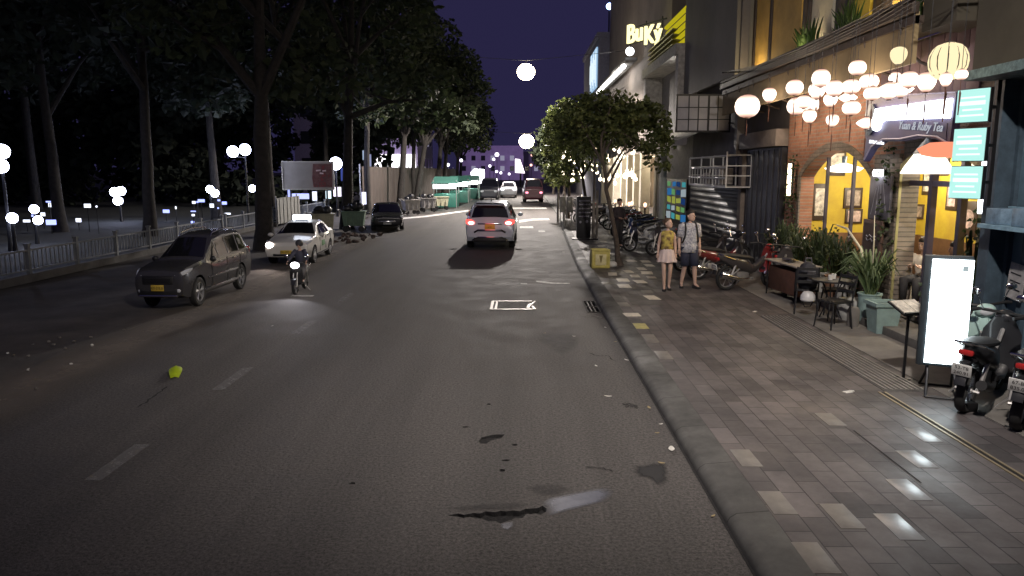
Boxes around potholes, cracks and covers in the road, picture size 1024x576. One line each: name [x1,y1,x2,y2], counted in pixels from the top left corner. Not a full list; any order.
drain grate [582,301,601,313]
pothole [448,506,547,523]
pothole [479,434,504,444]
